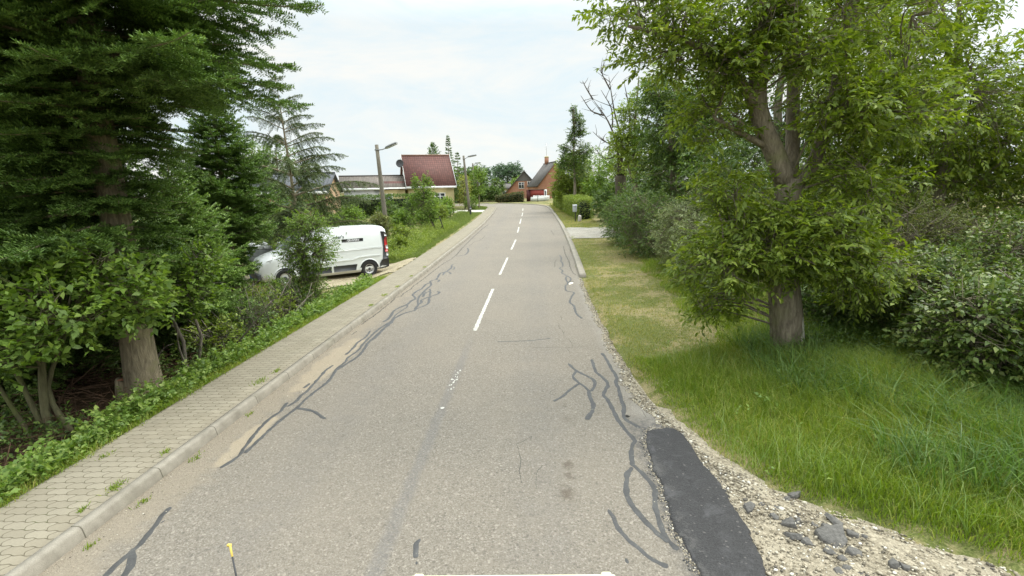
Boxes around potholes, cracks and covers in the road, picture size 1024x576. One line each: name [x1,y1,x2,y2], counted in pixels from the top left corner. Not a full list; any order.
crack [351,224,489,335]
